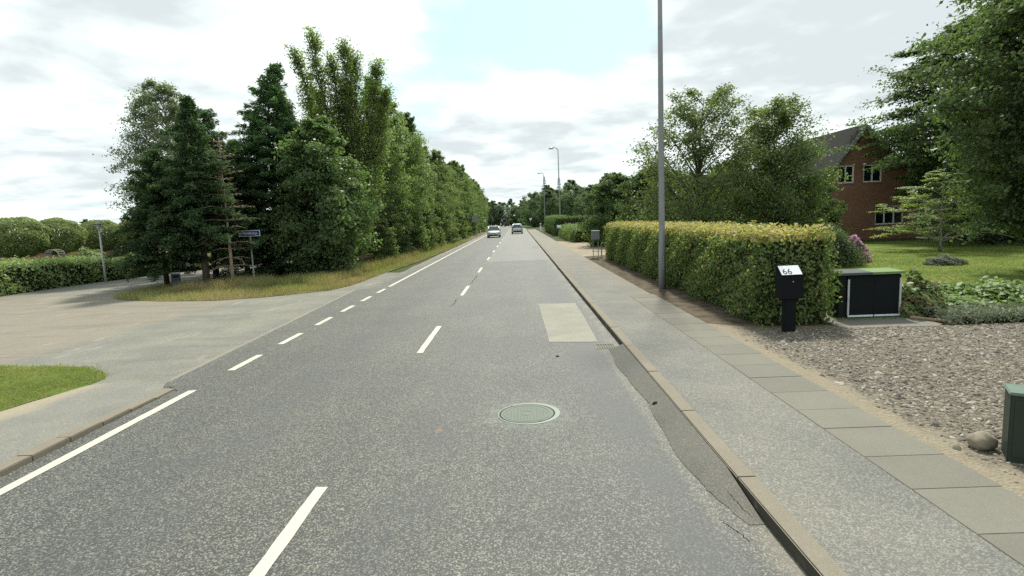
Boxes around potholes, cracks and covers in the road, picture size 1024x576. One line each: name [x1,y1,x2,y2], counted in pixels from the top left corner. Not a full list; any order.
crack [722,492,753,543]
manhole cover [498,403,560,425]
